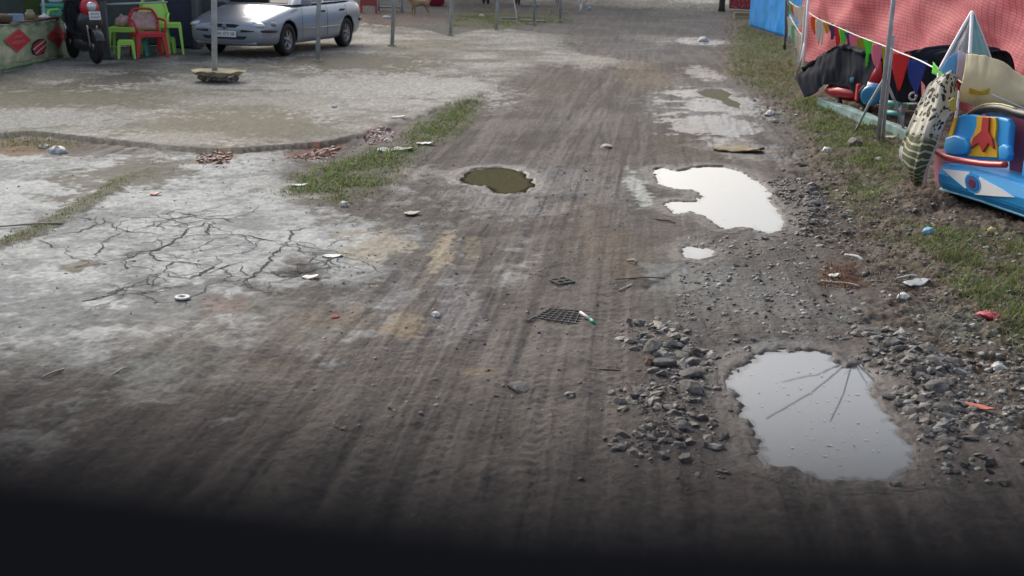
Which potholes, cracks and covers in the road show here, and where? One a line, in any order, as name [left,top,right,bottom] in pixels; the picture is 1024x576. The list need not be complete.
crack [36,204,382,313]
pothole [703,340,946,474]
pothole [443,165,549,198]
pothole [639,162,802,237]
